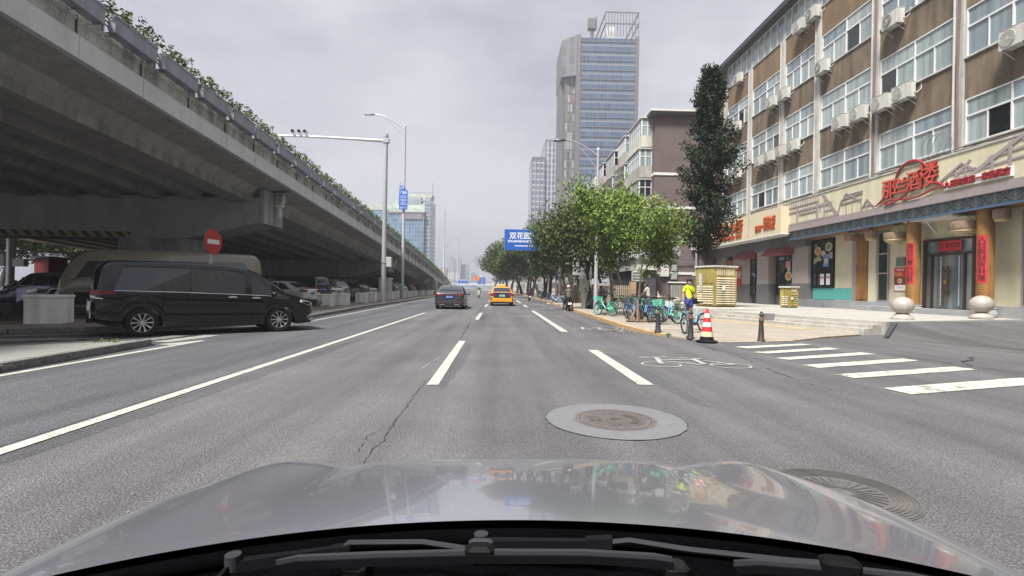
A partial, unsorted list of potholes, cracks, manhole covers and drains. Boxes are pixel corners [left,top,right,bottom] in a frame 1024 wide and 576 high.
crack [354,357,440,463]
manhole cover [545,404,688,440]
manhole cover [780,468,926,520]
